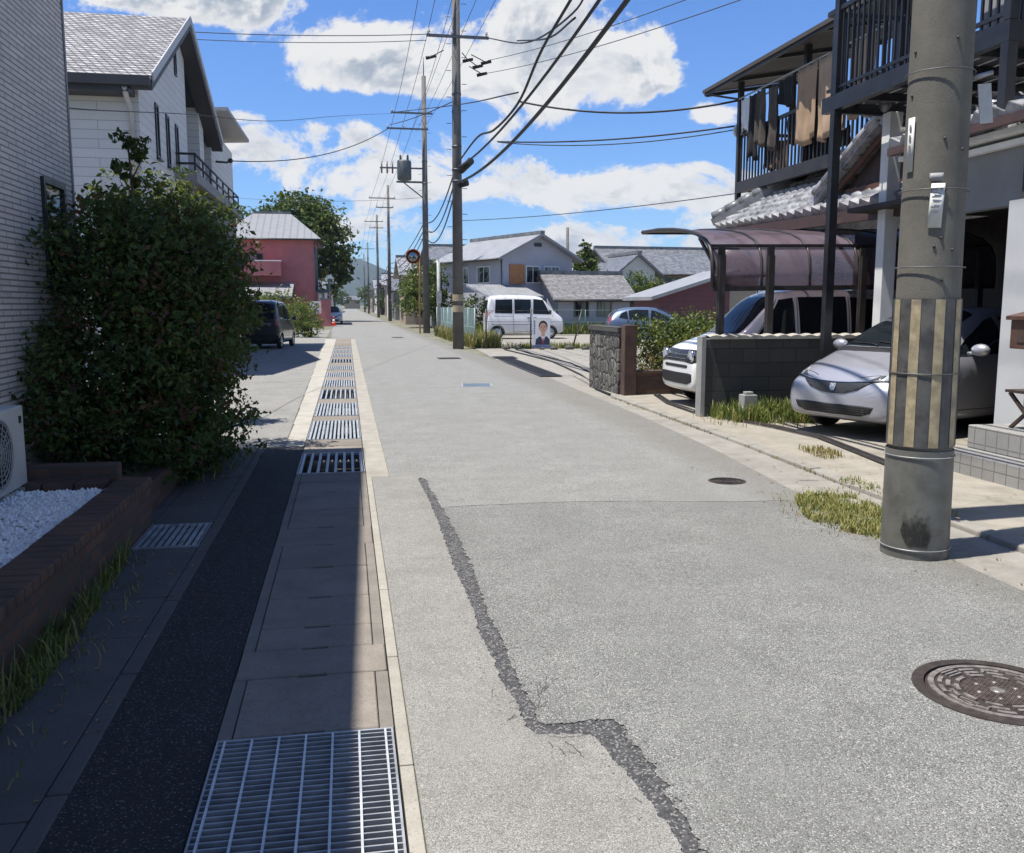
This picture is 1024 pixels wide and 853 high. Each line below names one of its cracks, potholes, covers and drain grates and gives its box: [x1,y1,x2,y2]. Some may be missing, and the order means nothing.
drain grate [319,389,357,399]
manhole cover [708,477,746,485]
manhole cover [911,659,1024,726]
drain grate [184,727,407,853]
drain grate [307,420,361,440]
drain grate [131,522,212,550]
drain grate [314,403,359,416]
crack [418,478,780,853]
drain grate [297,452,365,475]
